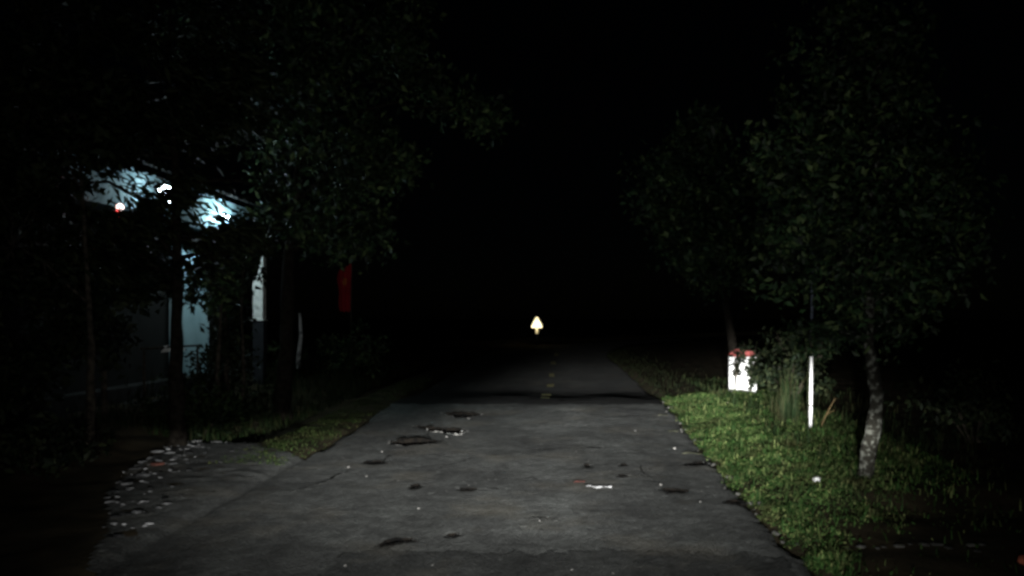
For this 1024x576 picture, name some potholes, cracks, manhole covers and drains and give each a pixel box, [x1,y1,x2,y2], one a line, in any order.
crack [578,447,656,483]
pothole [387,438,443,447]
pothole [375,537,420,547]
pothole [412,425,469,435]
crack [288,469,352,492]
